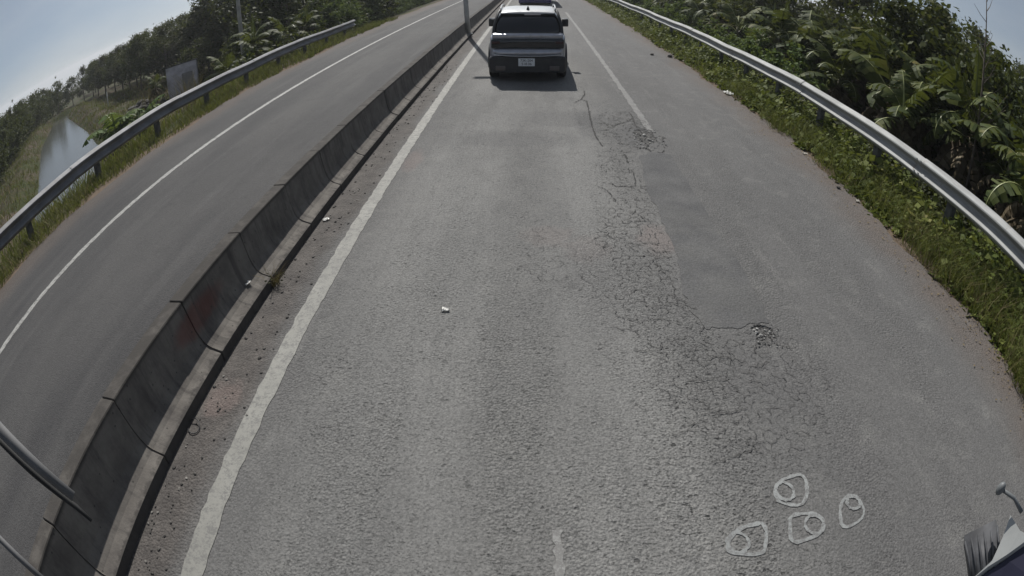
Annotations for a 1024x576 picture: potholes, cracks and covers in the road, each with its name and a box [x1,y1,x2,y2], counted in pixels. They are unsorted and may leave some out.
crack [575,91,831,463]
pothole [751,324,784,348]
